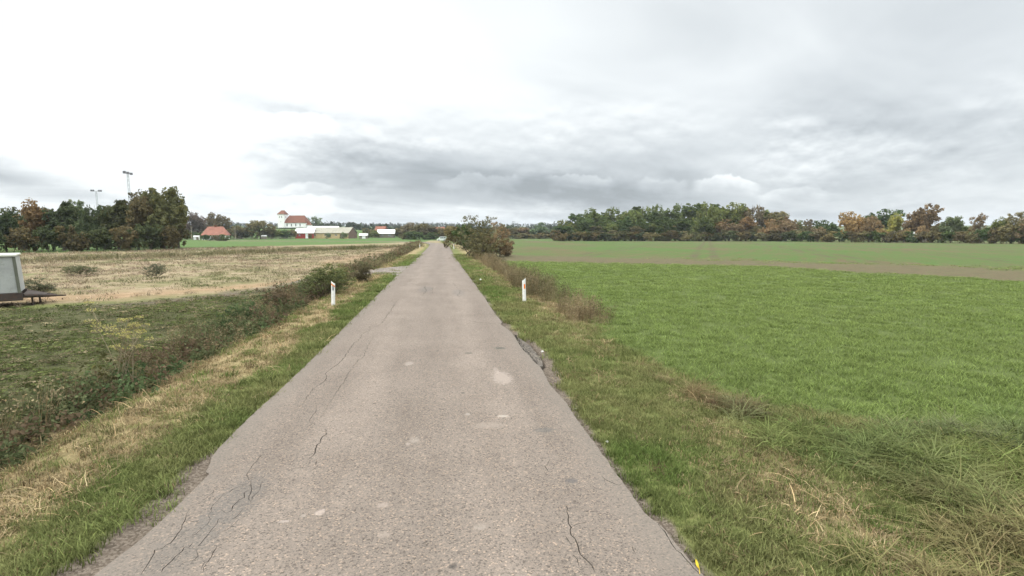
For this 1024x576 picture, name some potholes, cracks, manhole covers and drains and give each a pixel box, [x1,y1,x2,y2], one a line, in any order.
crack [290,303,396,472]
crack [141,458,262,574]
crack [566,506,595,572]
